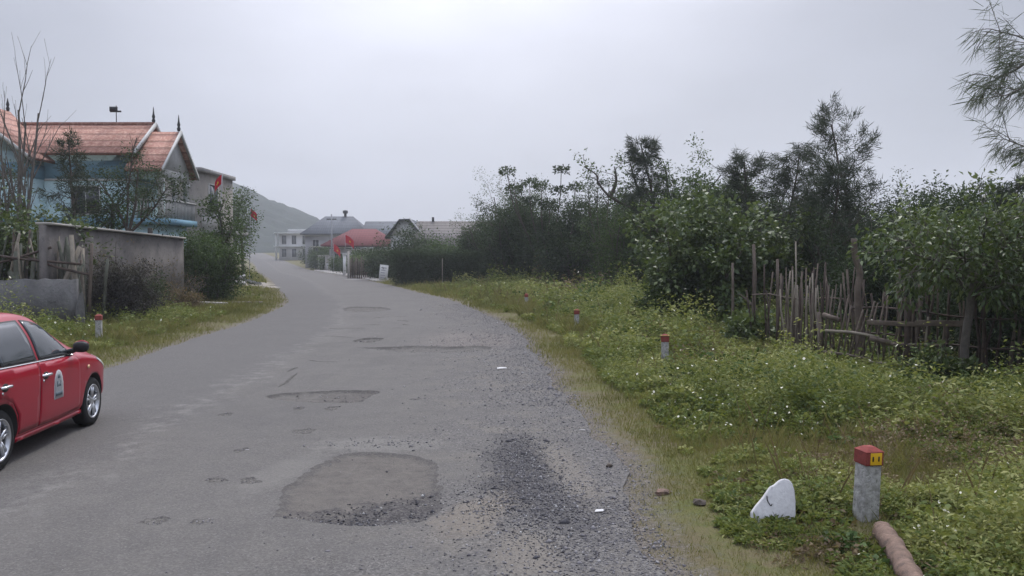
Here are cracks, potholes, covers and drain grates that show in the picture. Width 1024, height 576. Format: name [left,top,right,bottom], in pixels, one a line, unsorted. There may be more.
crack [279,360,323,387]
pothole [136,516,172,525]
pothole [266,390,380,403]
pothole [358,345,494,353]
pothole [271,452,444,526]
